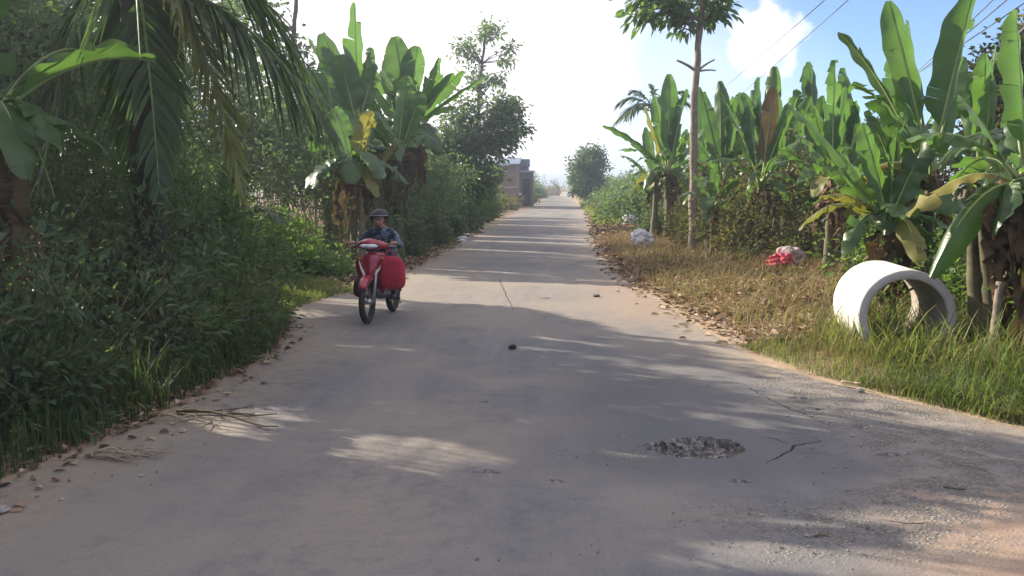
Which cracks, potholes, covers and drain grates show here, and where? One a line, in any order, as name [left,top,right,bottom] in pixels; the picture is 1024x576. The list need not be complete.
pothole [637,436,747,459]
crack [741,383,830,463]
